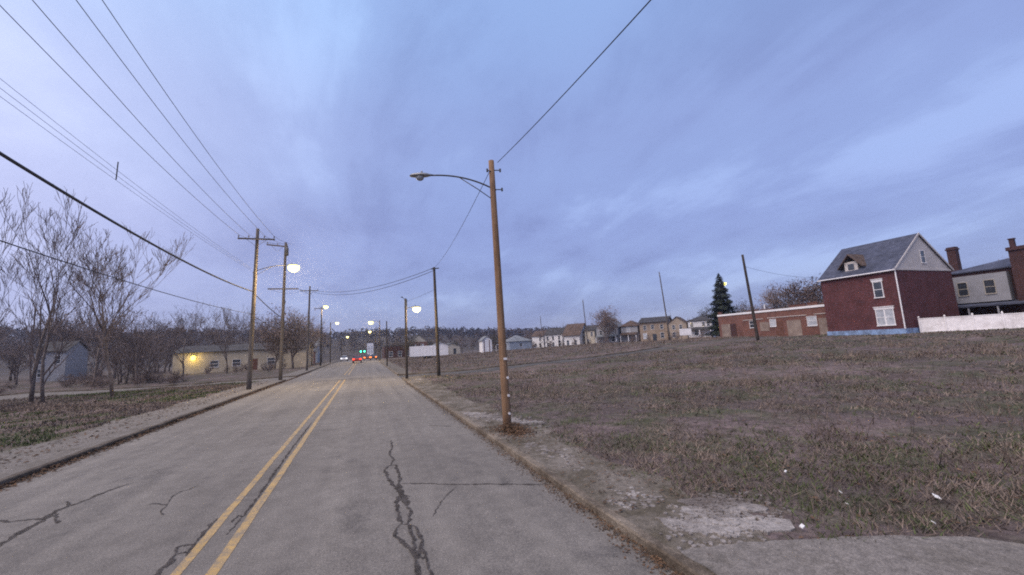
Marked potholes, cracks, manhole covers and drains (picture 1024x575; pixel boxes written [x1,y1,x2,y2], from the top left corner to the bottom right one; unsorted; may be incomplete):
crack [383,441,536,575]
crack [0,482,133,546]
